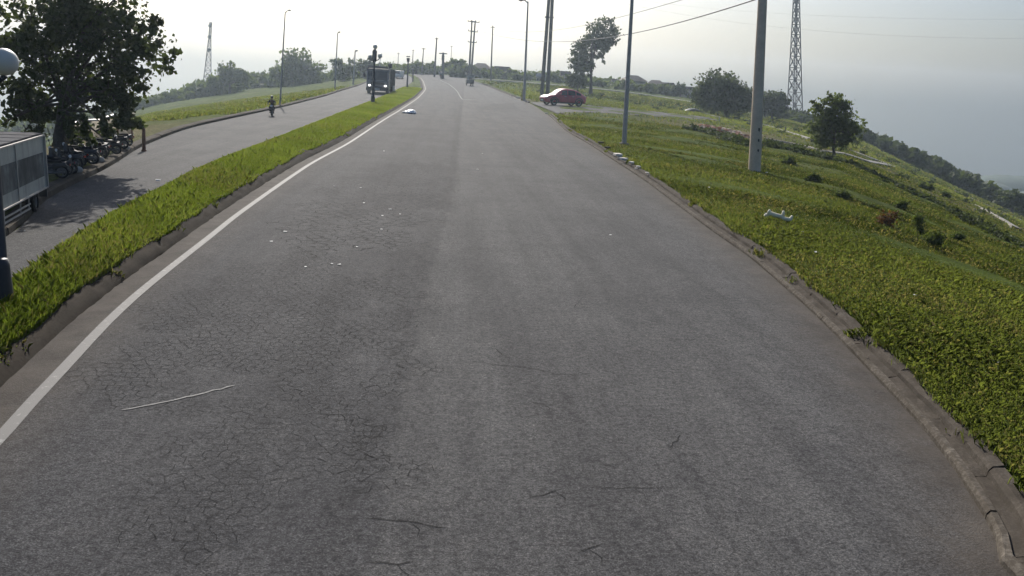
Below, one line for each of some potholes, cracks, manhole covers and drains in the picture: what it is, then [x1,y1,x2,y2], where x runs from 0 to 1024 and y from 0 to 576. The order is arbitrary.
crack [65,161,457,566]
